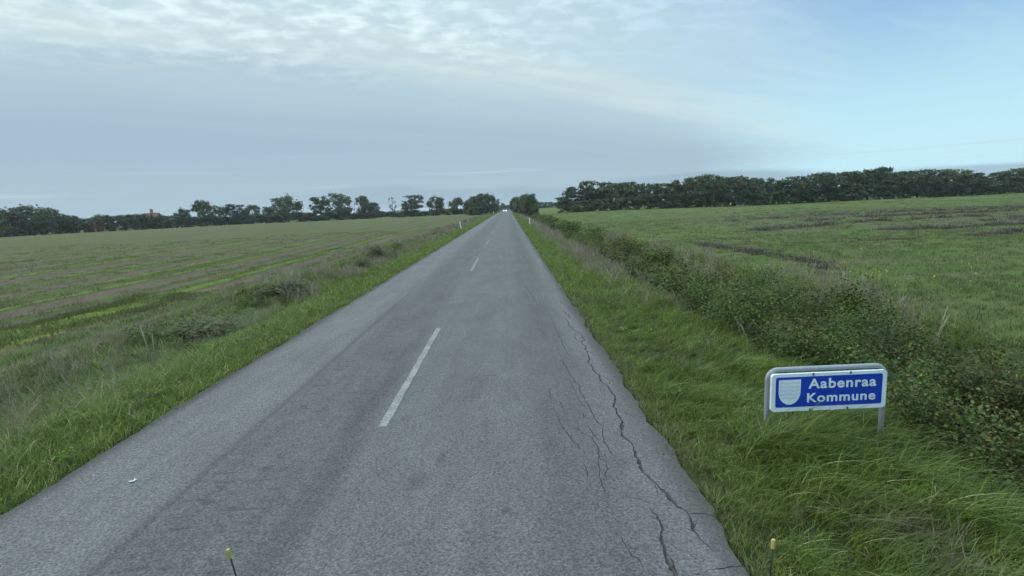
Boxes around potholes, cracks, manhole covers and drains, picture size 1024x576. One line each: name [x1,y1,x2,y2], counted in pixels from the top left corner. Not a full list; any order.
crack [528,290,746,576]
